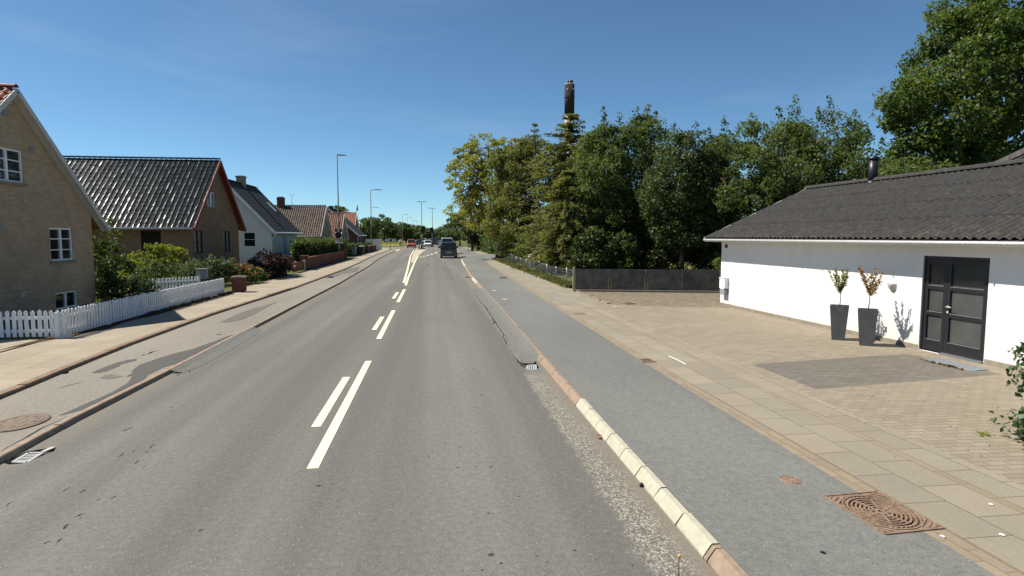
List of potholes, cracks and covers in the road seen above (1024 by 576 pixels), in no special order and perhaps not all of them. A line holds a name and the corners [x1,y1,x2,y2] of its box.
drain grate [11,452,45,464]
manhole cover [0,413,51,433]
manhole cover [779,475,802,485]
crack [474,293,522,361]
